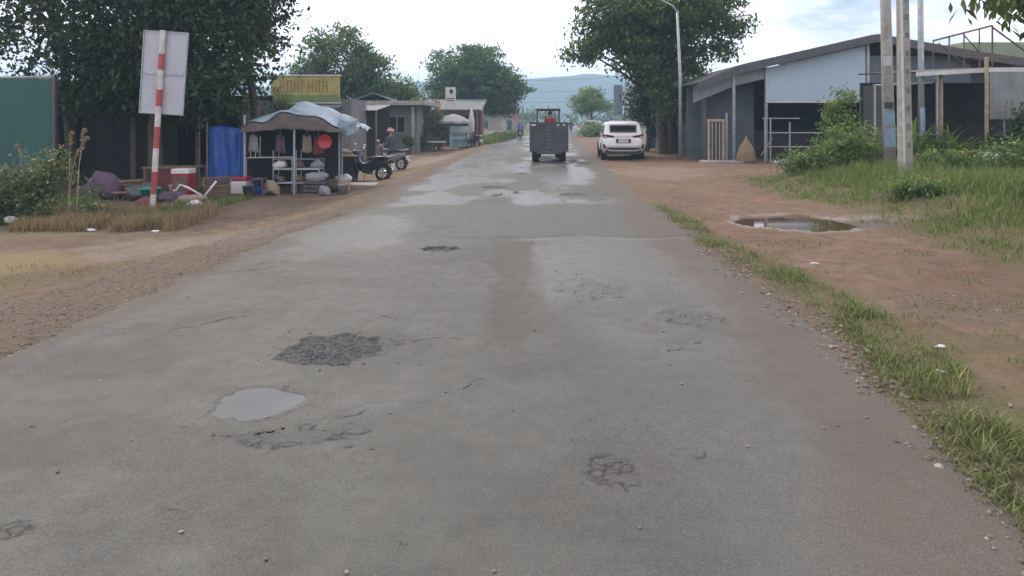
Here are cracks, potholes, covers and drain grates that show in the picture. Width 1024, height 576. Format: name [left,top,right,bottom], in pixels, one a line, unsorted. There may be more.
pothole [240,325,415,379]
crack [576,447,721,495]
crack [0,490,225,546]
pothole [408,244,473,254]
crack [159,313,257,332]
pothole [174,377,340,437]
crack [176,402,406,472]
crack [541,276,740,356]
